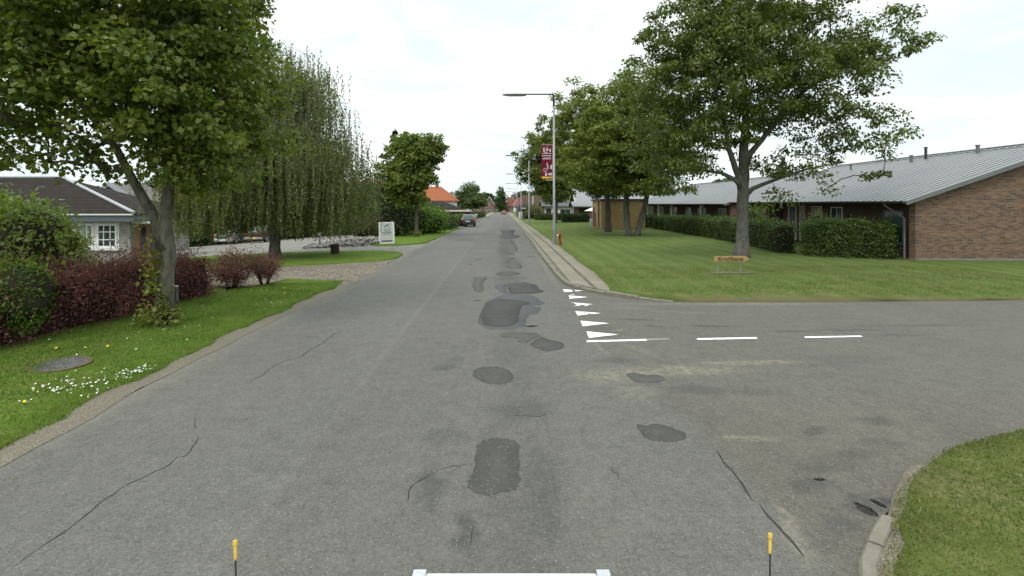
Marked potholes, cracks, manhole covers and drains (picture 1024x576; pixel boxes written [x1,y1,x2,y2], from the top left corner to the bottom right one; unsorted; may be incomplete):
crack [717,451,804,556]
pothole [853,502,879,517]
crack [408,464,467,500]
manhole cover [24,356,93,373]
crack [11,417,199,569]
